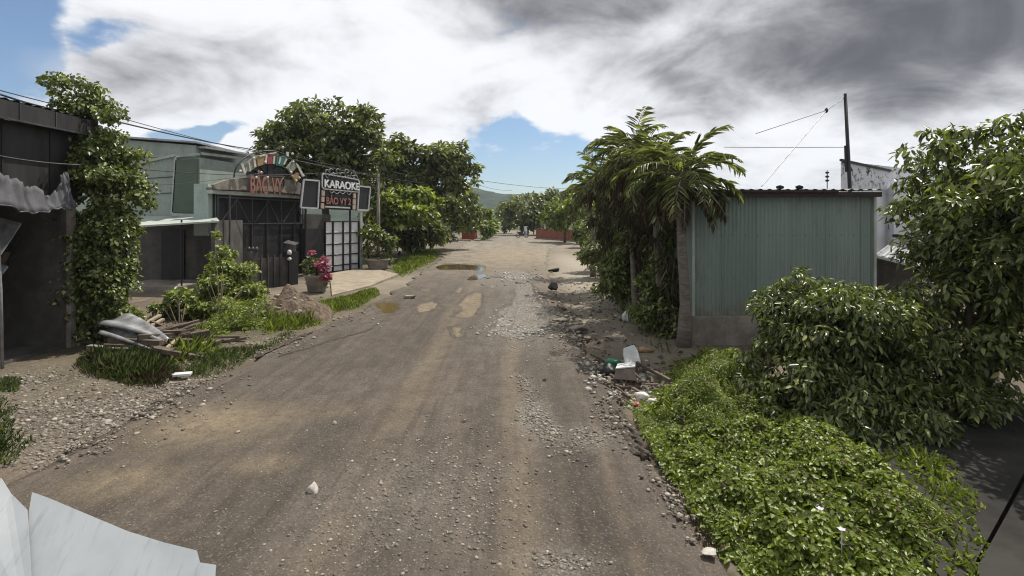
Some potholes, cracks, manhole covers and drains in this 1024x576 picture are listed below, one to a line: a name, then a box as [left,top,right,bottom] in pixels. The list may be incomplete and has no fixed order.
pothole [462,273,491,281]
pothole [368,300,405,314]
pothole [430,263,489,273]
